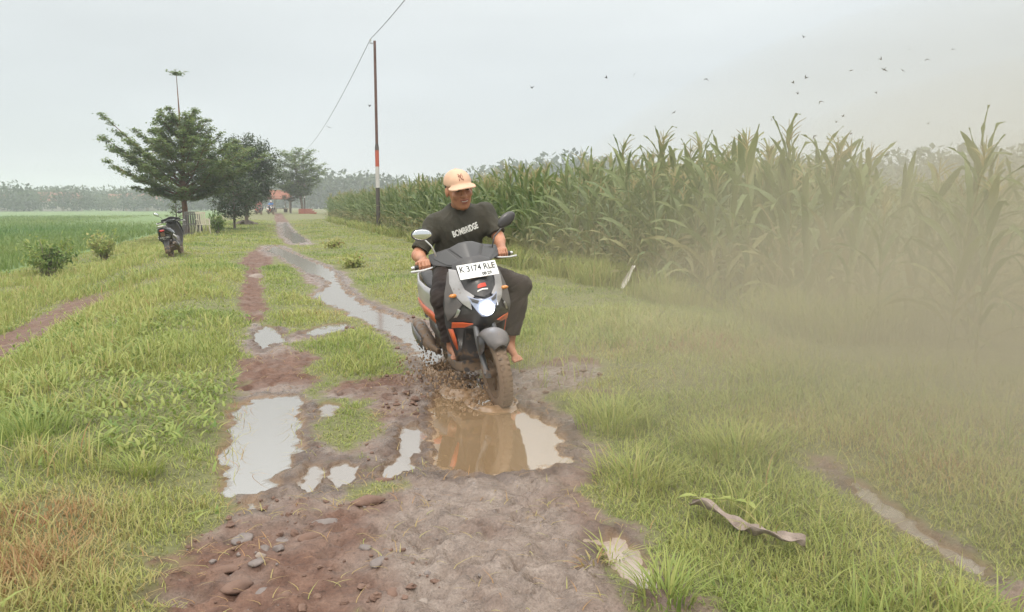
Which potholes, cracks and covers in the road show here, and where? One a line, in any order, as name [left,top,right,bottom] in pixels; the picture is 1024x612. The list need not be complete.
pothole [198,390,320,517]
pothole [247,324,291,351]
pothole [418,382,584,483]
pothole [261,244,445,376]
pothole [281,455,331,494]
pothole [323,456,369,490]
pothole [360,418,428,484]
